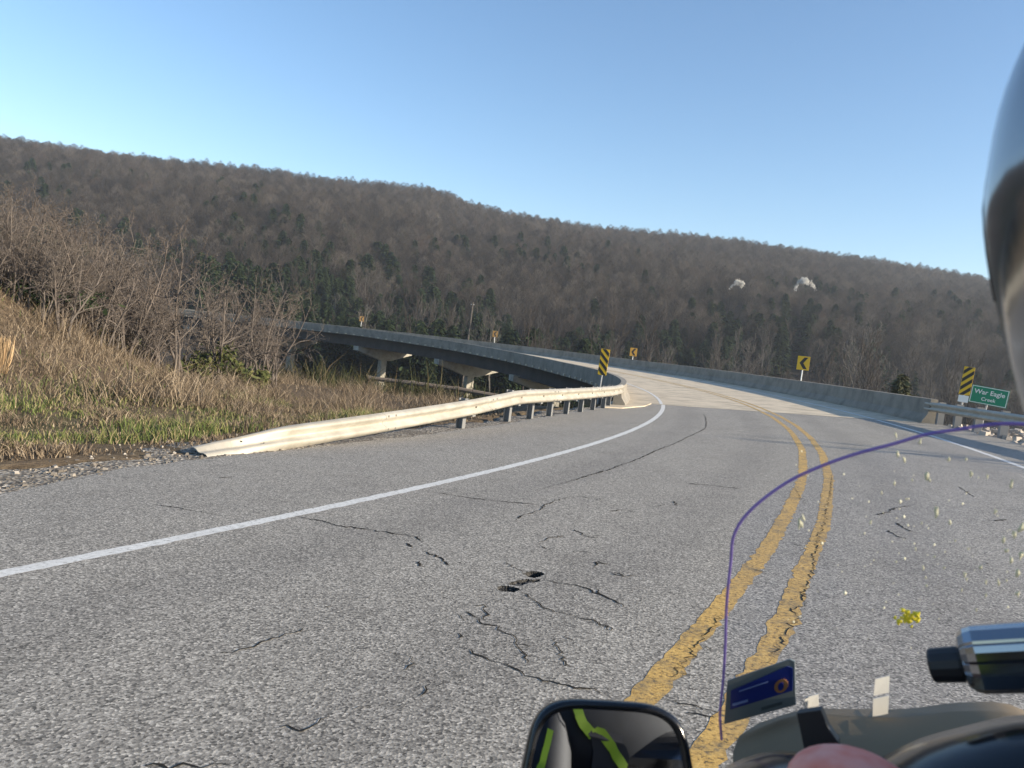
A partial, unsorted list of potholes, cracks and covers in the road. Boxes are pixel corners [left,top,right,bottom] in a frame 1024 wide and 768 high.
crack [215,628,303,654]
pothole [509,579,540,588]
crack [297,516,449,567]
crack [435,492,678,693]
